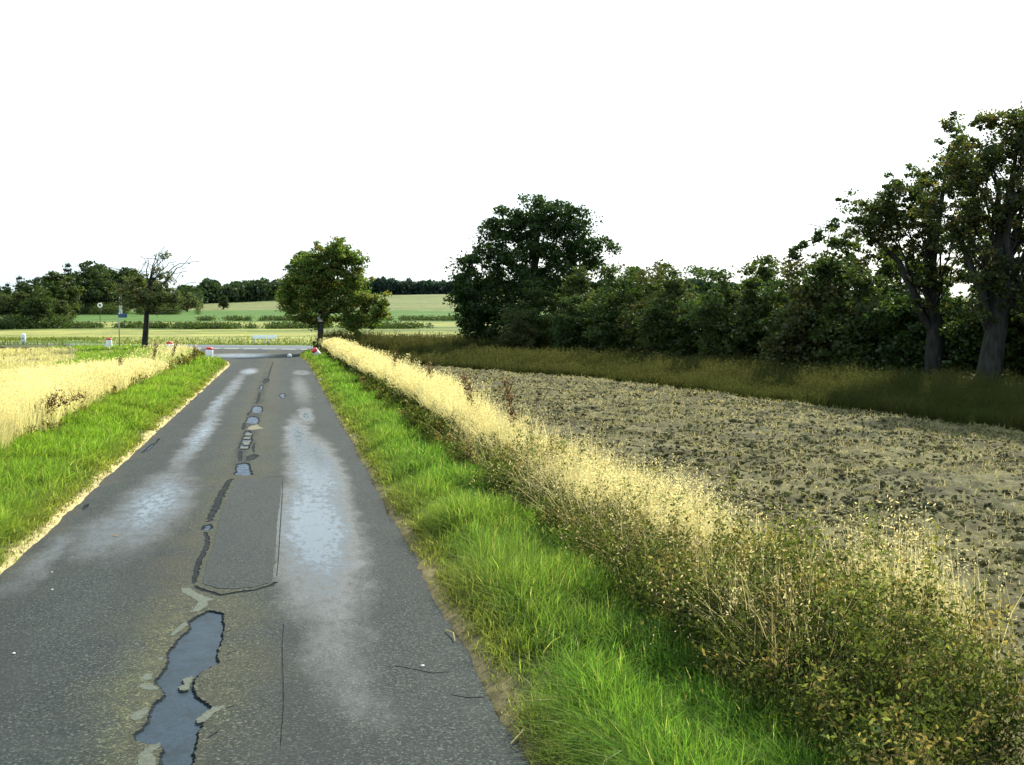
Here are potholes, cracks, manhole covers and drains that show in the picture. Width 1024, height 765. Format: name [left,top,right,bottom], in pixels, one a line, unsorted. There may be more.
pothole [132,610,226,765]
pothole [233,463,253,476]
pothole [237,430,253,450]
crack [191,412,283,596]
